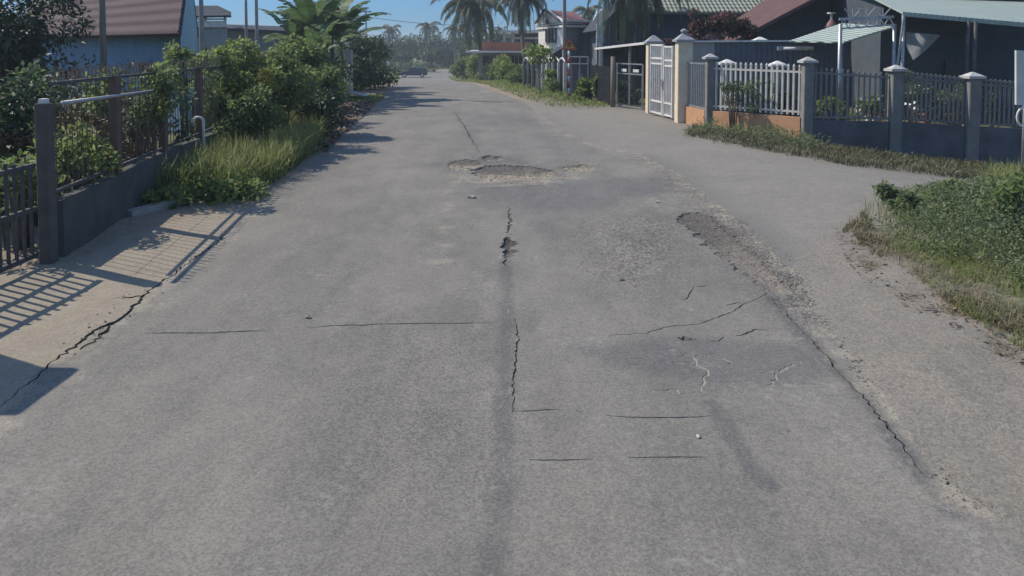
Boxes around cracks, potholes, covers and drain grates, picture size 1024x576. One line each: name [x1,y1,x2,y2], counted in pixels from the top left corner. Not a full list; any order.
pothole [470,164,555,181]
pothole [447,159,481,170]
crack [611,294,922,473]
crack [511,317,557,413]
pothole [675,212,794,295]
pothole [557,164,594,173]
crack [502,206,513,267]
